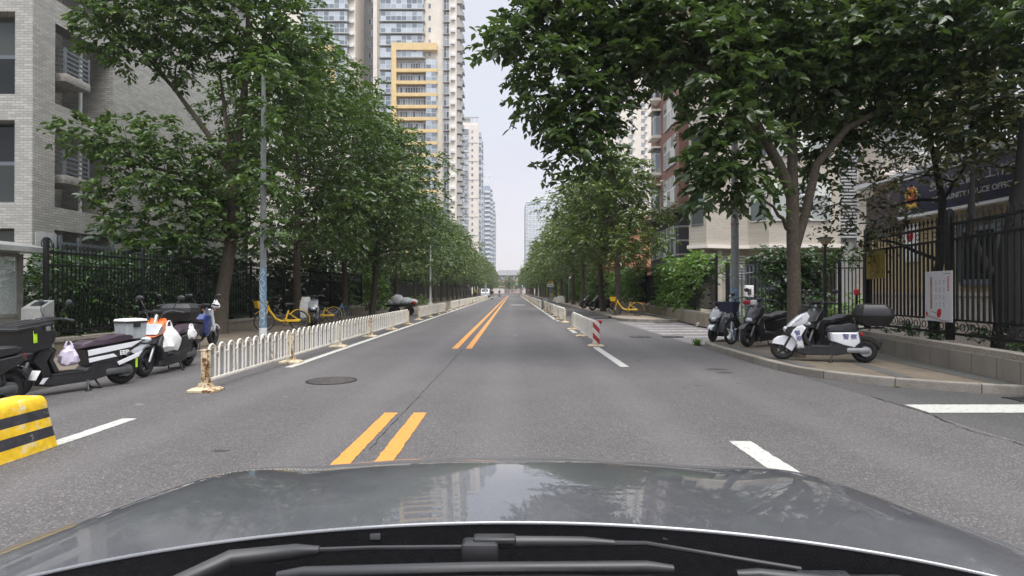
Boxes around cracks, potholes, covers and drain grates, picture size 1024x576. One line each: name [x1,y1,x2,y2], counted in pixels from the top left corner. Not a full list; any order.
crack [369,350,462,450]
manhole cover [305,377,357,385]
